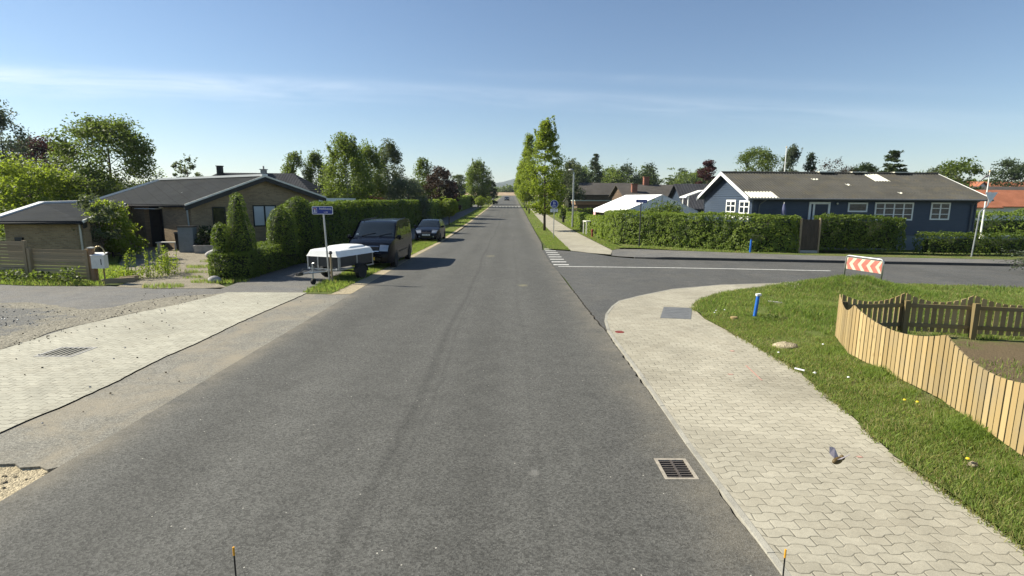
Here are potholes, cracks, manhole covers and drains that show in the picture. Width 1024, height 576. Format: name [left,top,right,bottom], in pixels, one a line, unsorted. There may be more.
drain grate [654,458,700,480]
manhole cover [660,307,692,319]
drain grate [33,347,97,357]
